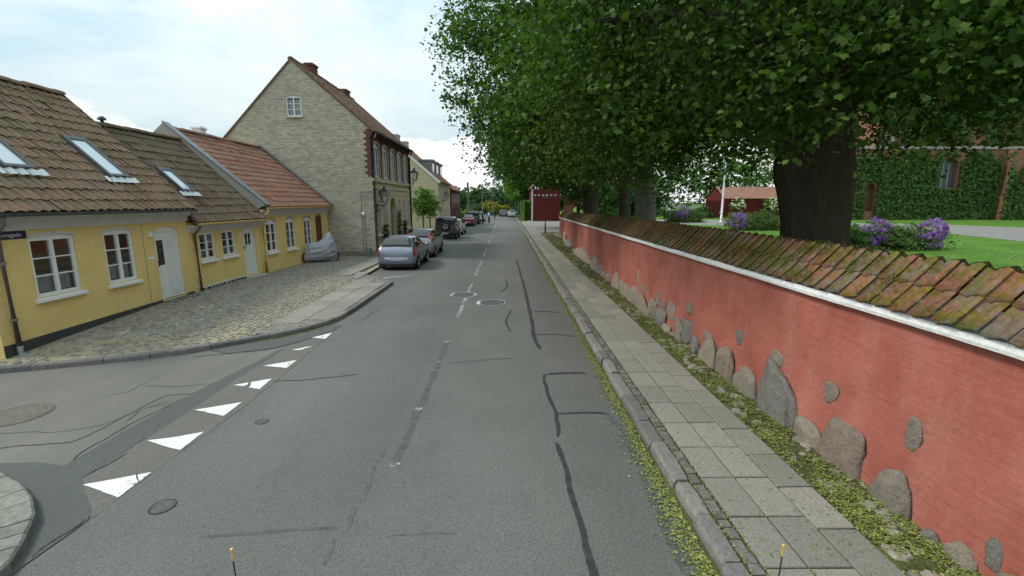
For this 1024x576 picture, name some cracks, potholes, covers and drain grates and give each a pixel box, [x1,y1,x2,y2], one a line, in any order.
crack [3,380,210,461]
manhole cover [148,499,177,515]
manhole cover [0,403,56,427]
